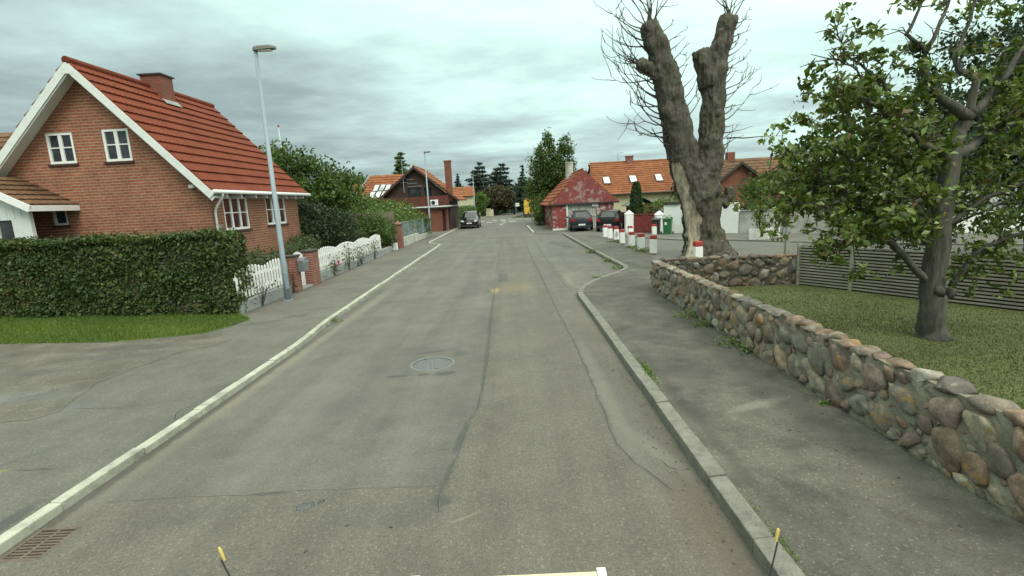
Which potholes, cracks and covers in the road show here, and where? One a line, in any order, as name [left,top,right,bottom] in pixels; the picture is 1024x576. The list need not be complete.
drain grate [0,526,83,562]
manhole cover [409,356,455,371]
